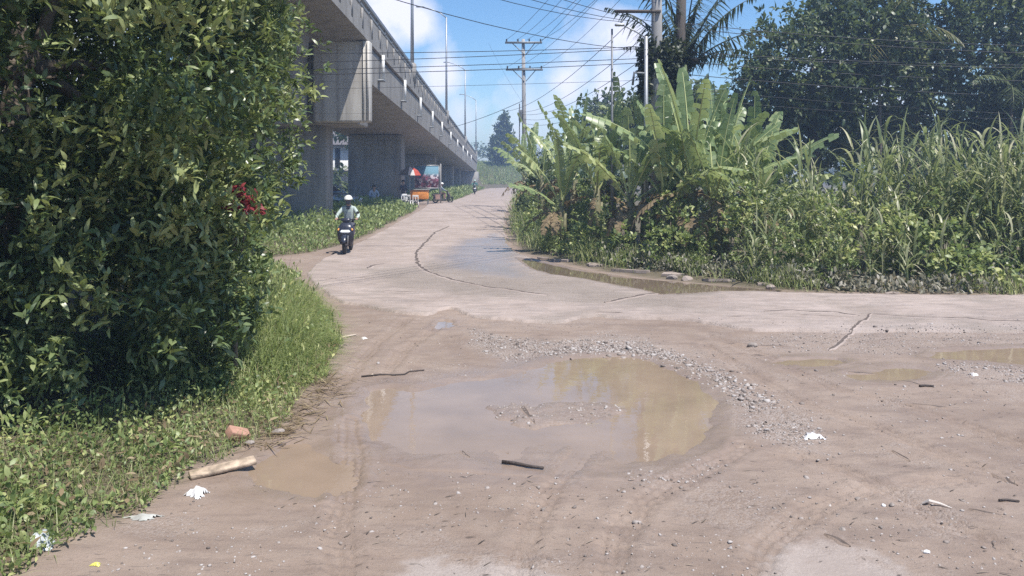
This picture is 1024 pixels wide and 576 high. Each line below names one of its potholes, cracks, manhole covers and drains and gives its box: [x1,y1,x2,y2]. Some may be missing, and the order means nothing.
pothole [830,362,951,385]
pothole [225,433,379,506]
crack [764,310,1024,351]
pothole [768,355,856,368]
crack [385,226,547,295]
pothole [337,351,736,482]
pothole [915,345,1024,366]
crack [596,293,659,314]
pothole [429,318,460,330]
